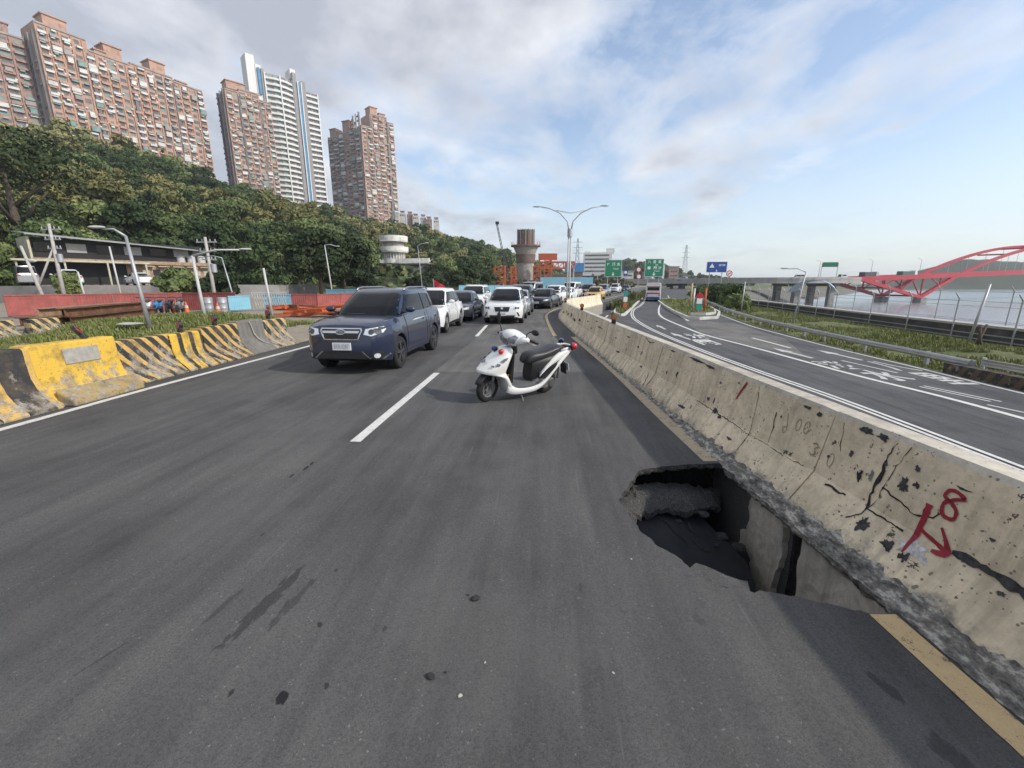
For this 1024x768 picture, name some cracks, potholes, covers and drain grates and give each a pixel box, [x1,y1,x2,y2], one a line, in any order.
pothole [618,463,802,596]
